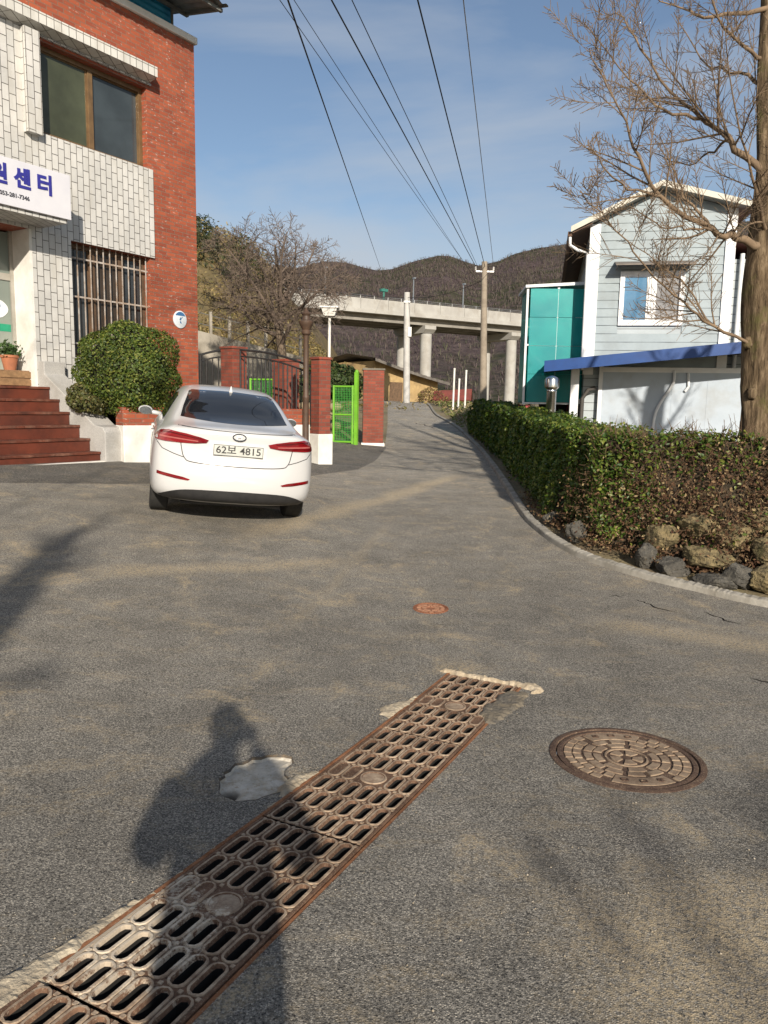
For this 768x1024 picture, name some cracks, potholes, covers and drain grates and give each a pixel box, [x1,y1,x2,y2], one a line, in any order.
drain grate [0,981,121,1024]
manhole cover [413,602,449,614]
drain grate [264,728,462,849]
manhole cover [549,728,708,793]
drain grate [42,816,361,1024]
